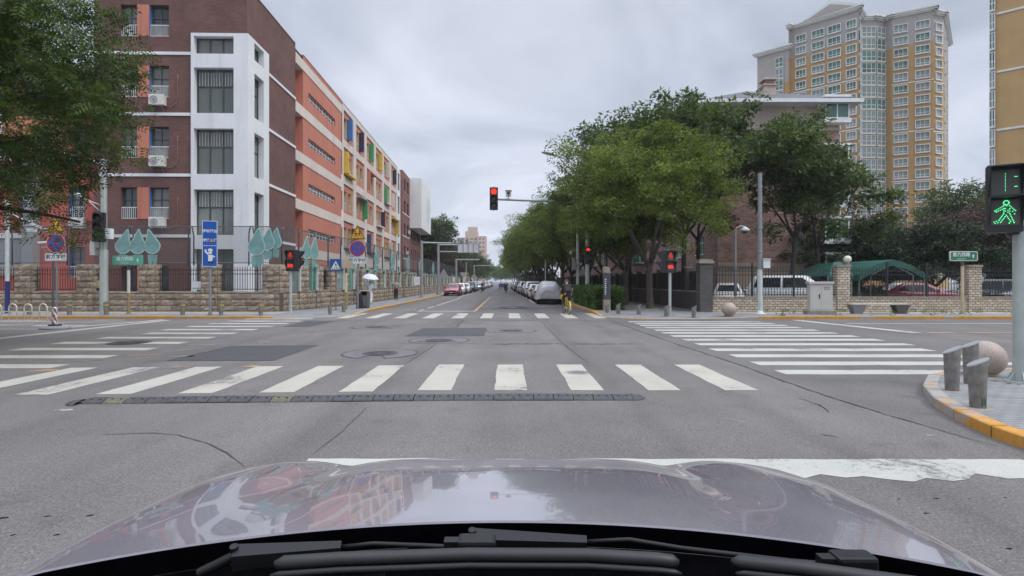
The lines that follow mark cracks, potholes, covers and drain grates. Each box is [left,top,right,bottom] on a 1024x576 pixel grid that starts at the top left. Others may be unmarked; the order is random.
manhole cover [341,348,418,358]
crack [118,432,244,466]
